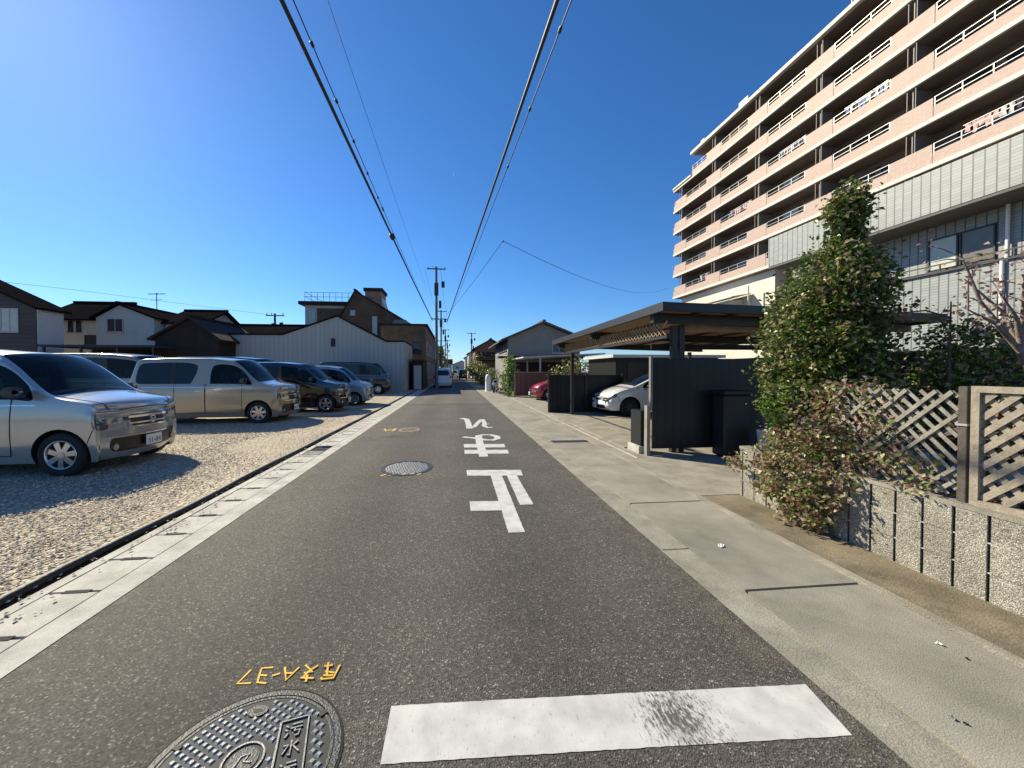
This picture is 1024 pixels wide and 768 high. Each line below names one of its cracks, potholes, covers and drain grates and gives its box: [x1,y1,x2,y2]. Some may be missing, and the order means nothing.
manhole cover [145,689,344,768]
manhole cover [381,461,433,476]
